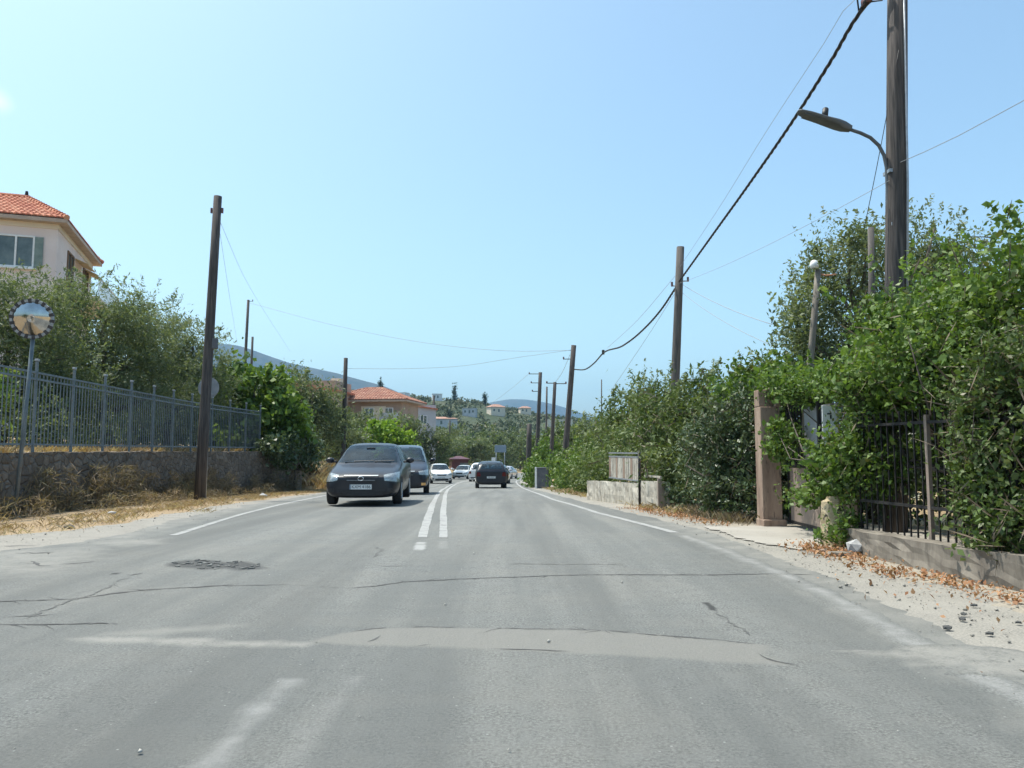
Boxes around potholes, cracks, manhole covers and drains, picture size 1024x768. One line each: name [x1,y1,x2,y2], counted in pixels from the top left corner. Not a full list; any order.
pothole [162,559,272,572]
crack [355,547,811,588]
crack [357,611,796,665]
crack [5,573,284,630]
